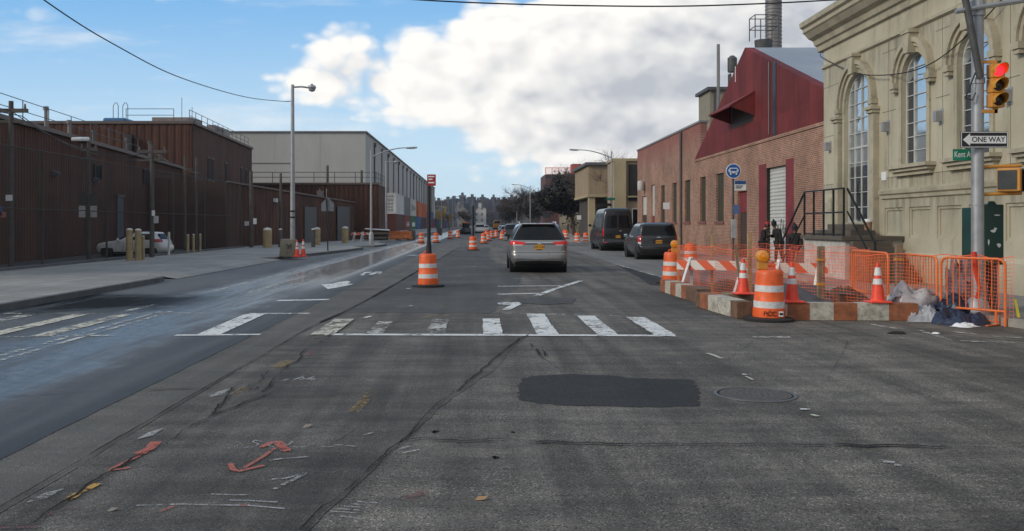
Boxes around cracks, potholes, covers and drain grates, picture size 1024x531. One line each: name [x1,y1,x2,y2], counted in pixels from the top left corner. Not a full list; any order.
crack [299,334,1004,530]
crack [25,320,353,526]
manhole cover [713,386,798,402]
